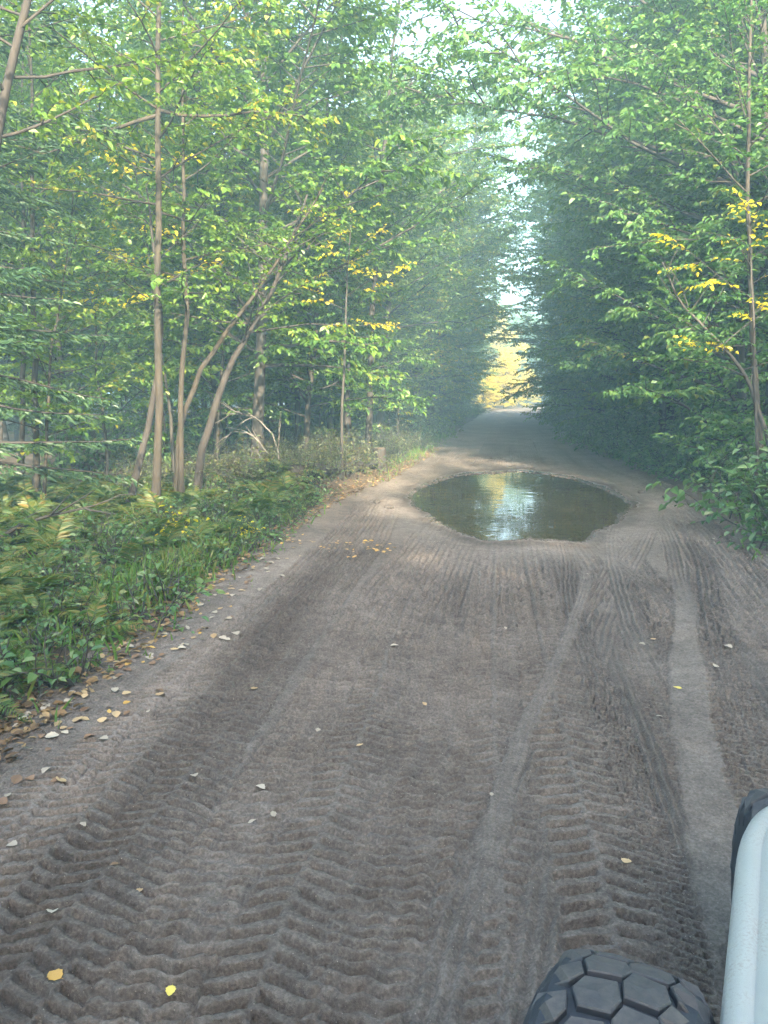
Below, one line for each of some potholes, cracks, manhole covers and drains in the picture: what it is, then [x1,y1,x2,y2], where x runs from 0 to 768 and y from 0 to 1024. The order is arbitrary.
pothole [401,469,643,548]
